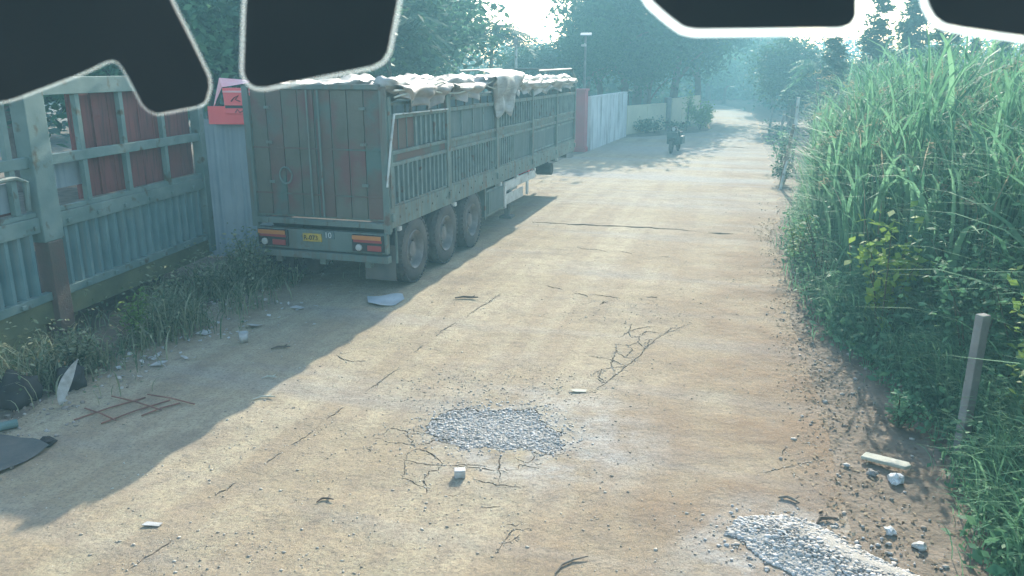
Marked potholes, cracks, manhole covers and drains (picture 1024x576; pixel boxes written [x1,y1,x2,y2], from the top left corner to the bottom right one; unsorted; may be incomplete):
crack [583,324,688,395]
crack [368,428,563,552]
pothole [401,396,601,462]
